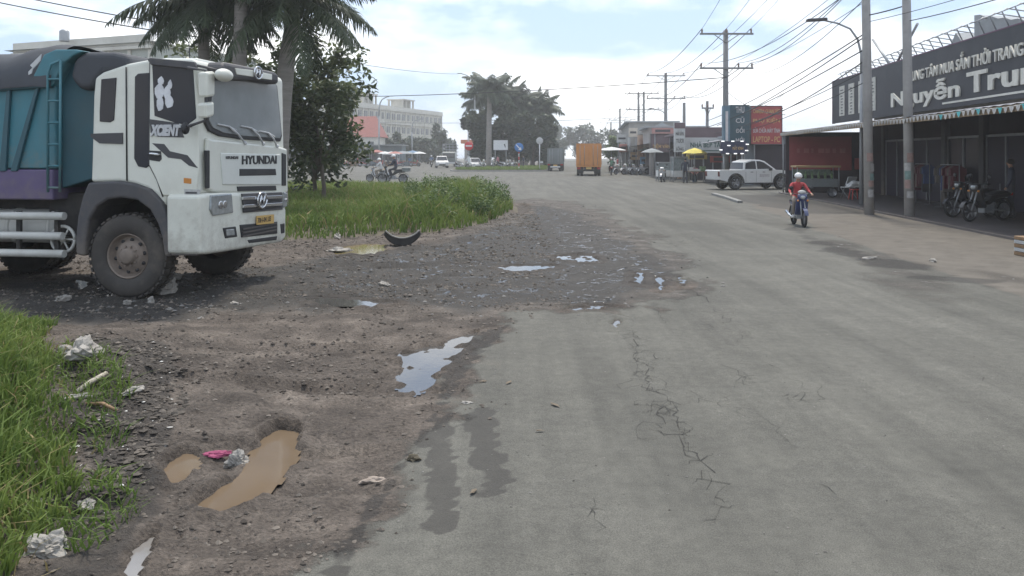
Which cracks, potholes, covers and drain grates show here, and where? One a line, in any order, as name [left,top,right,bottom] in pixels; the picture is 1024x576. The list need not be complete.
pothole [174,414,317,522]
crack [618,330,732,523]
crack [695,364,829,488]
pothole [382,327,498,399]
